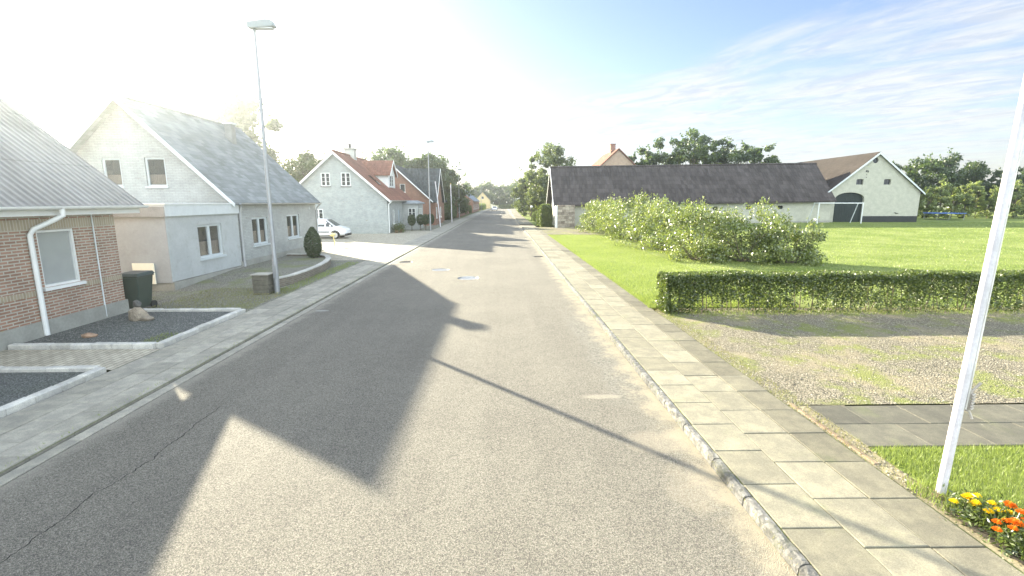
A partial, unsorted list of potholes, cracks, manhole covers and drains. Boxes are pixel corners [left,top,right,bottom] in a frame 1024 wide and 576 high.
crack [1,405,222,563]
